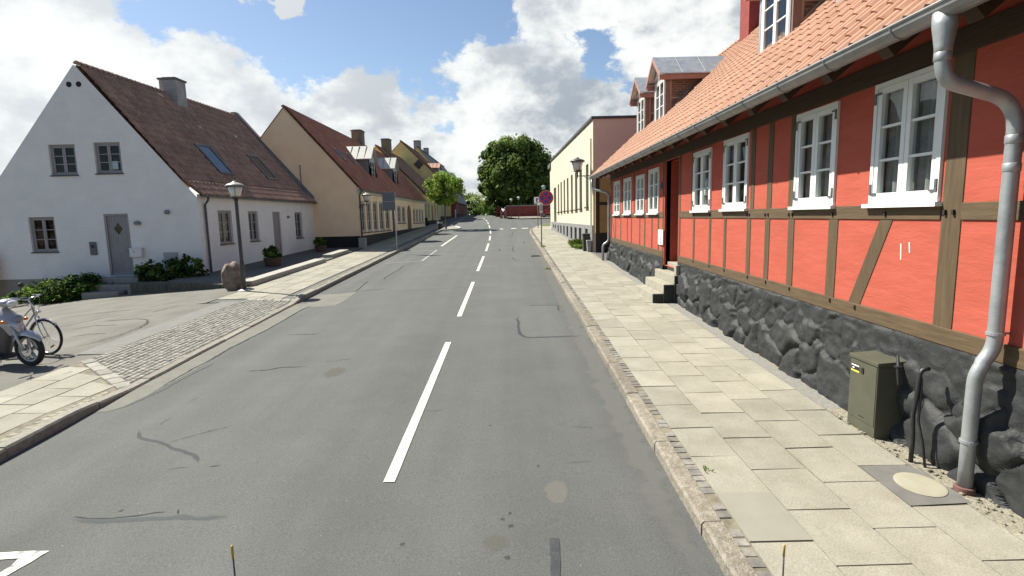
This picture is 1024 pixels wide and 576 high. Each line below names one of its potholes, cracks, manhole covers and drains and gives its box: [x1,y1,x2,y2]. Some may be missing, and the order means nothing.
crack [61,304,174,346]
crack [75,509,157,519]
crack [162,307,307,387]
manhole cover [893,472,948,498]
